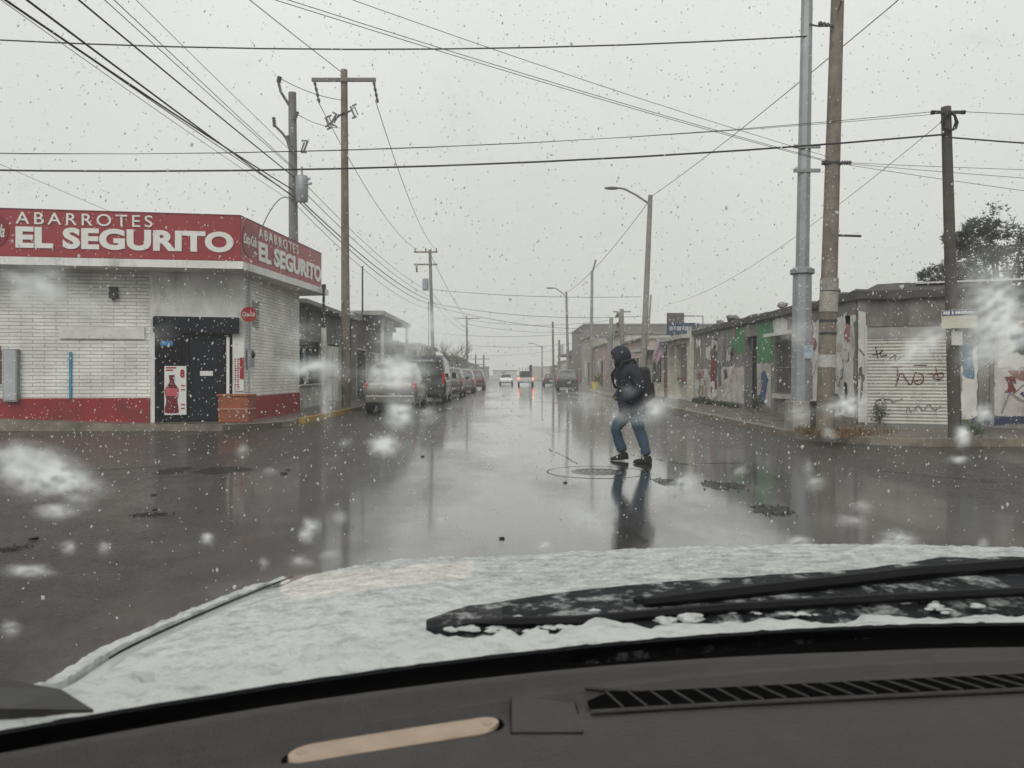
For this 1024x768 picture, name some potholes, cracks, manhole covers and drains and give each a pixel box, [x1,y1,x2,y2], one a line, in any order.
pothole [752,504,796,517]
manhole cover [546,466,647,479]
pothole [693,480,749,492]
